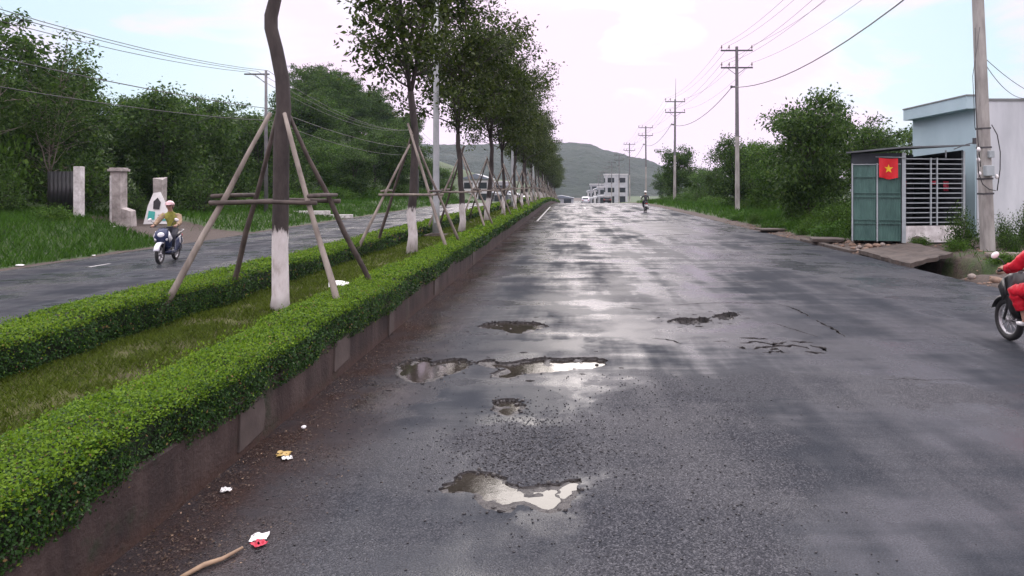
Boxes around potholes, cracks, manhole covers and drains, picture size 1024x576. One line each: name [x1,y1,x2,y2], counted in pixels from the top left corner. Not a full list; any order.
pothole [490,396,529,419]
pothole [465,317,561,334]
crack [678,303,845,354]
pothole [369,357,490,391]
pothole [657,314,712,327]
pothole [472,351,622,382]
pothole [438,467,585,520]
pothole [709,311,741,320]
